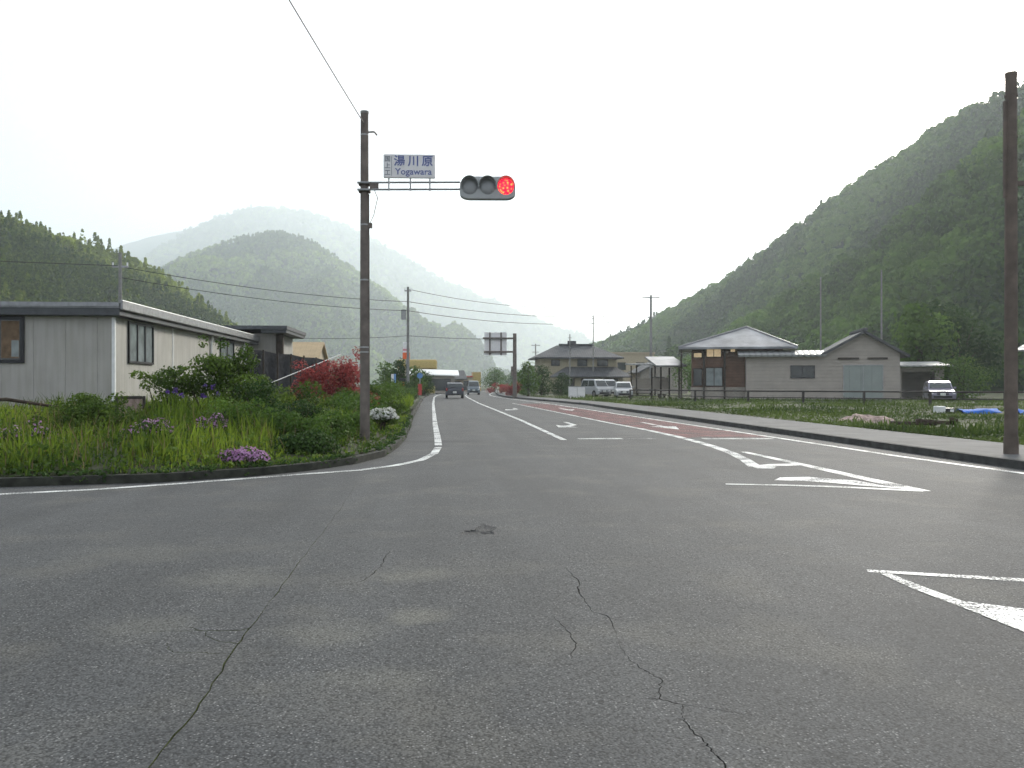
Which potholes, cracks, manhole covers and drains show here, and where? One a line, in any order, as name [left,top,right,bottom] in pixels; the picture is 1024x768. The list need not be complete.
pothole [459,524,497,536]
crack [566,568,752,768]
crack [148,483,356,768]
